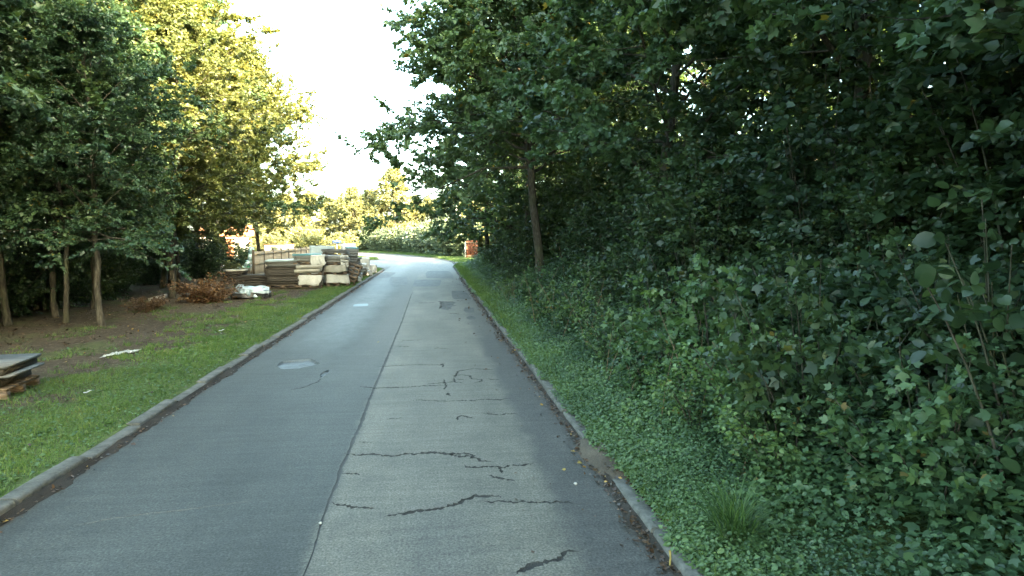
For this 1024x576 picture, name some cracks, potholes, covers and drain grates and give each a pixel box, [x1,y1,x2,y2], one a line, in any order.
crack [360,363,517,420]
crack [332,442,580,516]
crack [516,549,575,574]
